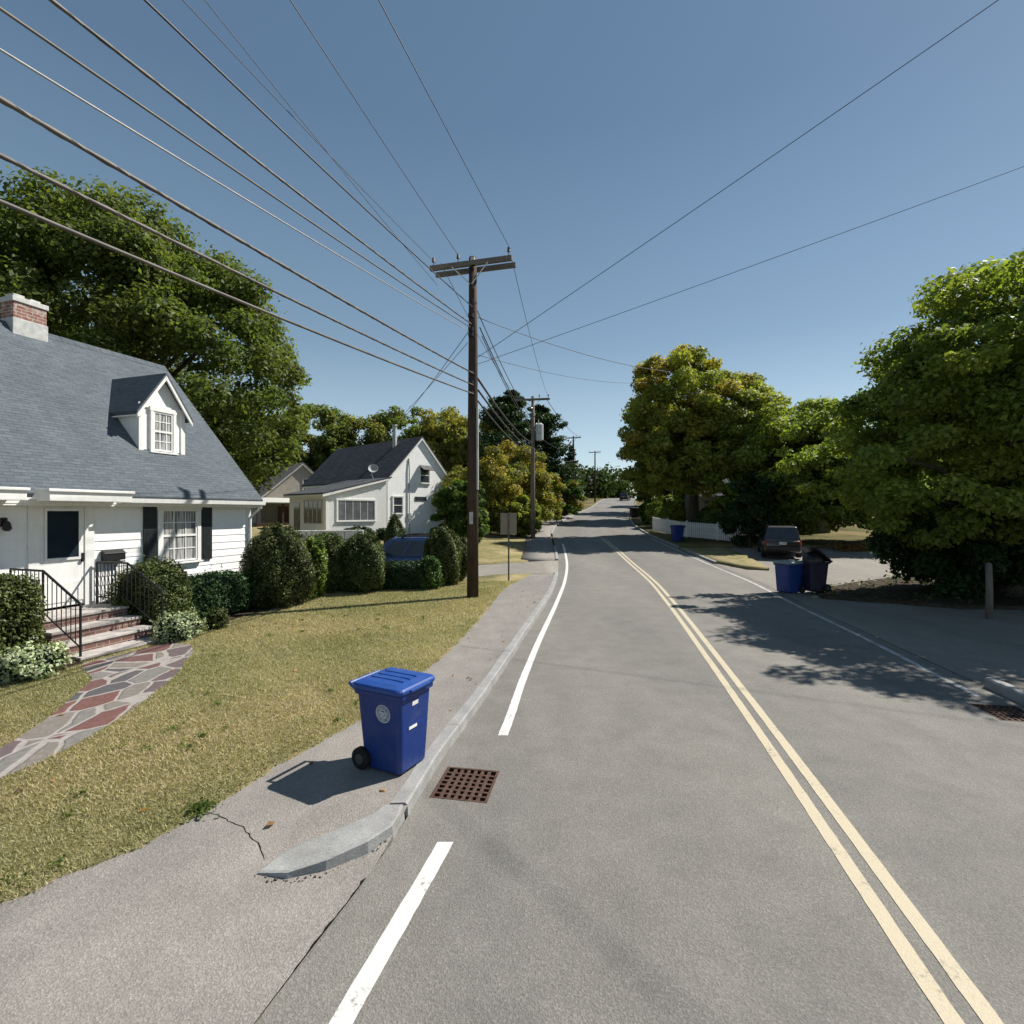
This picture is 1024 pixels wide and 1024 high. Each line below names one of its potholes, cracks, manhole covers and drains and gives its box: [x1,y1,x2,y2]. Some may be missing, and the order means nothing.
drain grate [969,703,1024,722]
drain grate [429,766,499,803]
crack [290,878,366,975]
crack [204,812,264,859]
